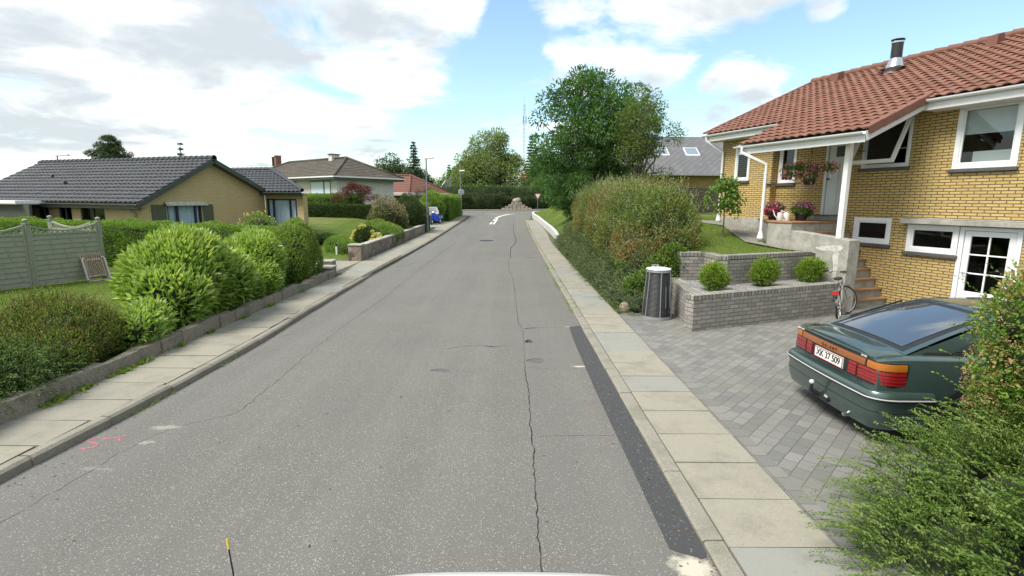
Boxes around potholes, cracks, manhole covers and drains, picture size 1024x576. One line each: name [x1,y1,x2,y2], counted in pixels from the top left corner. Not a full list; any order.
crack [510,273,543,572]
